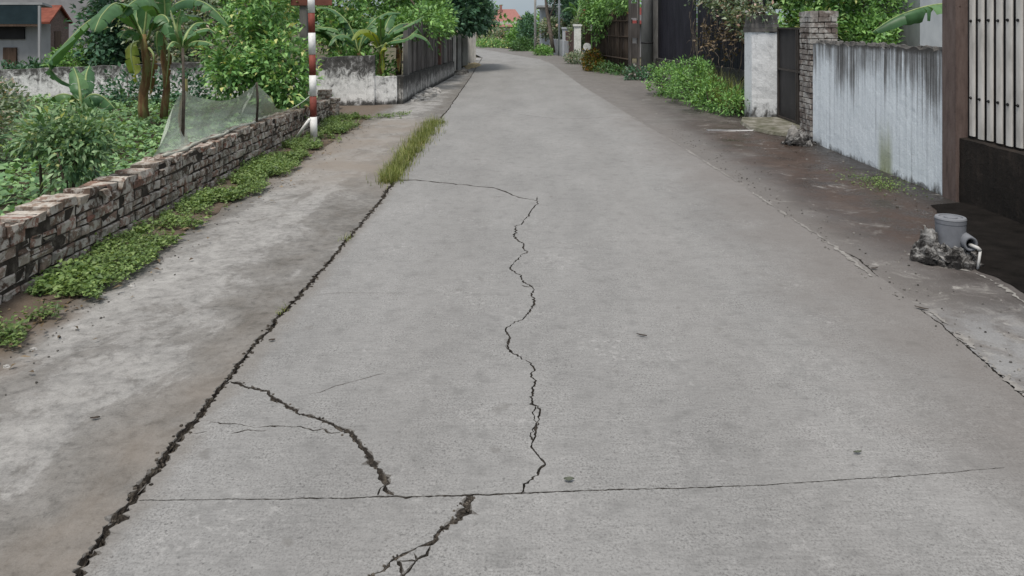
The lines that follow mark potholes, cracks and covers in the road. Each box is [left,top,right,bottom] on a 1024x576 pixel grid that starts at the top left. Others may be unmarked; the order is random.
crack [72,58,482,576]
crack [921,310,1024,397]
crack [403,180,546,493]
